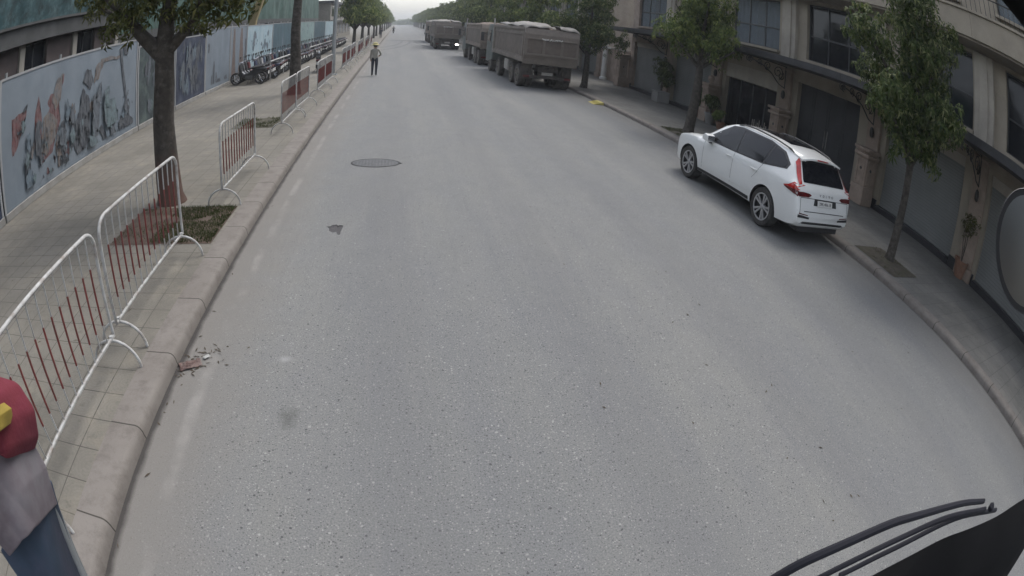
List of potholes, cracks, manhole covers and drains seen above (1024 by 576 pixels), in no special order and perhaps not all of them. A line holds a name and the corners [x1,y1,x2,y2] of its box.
pothole [328,224,343,235]
manhole cover [351,159,401,167]
